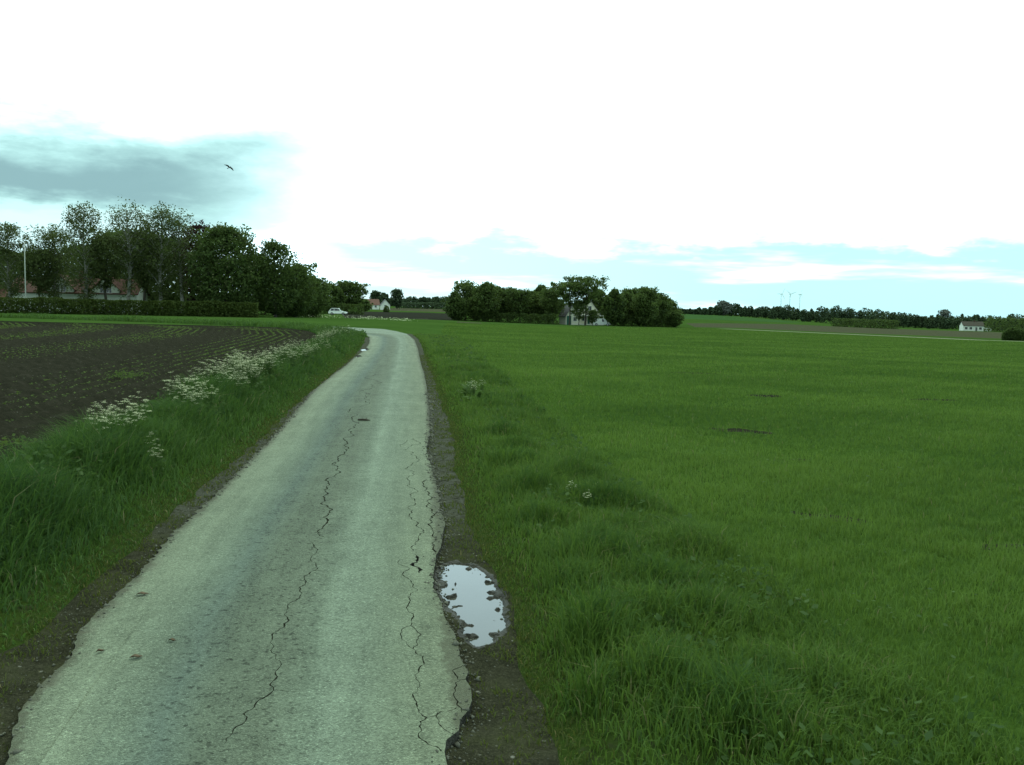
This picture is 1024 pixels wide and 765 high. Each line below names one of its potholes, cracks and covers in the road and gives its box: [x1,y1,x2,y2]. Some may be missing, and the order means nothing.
crack [224,374,382,744]
pothole [433,559,513,651]
crack [398,438,465,750]
